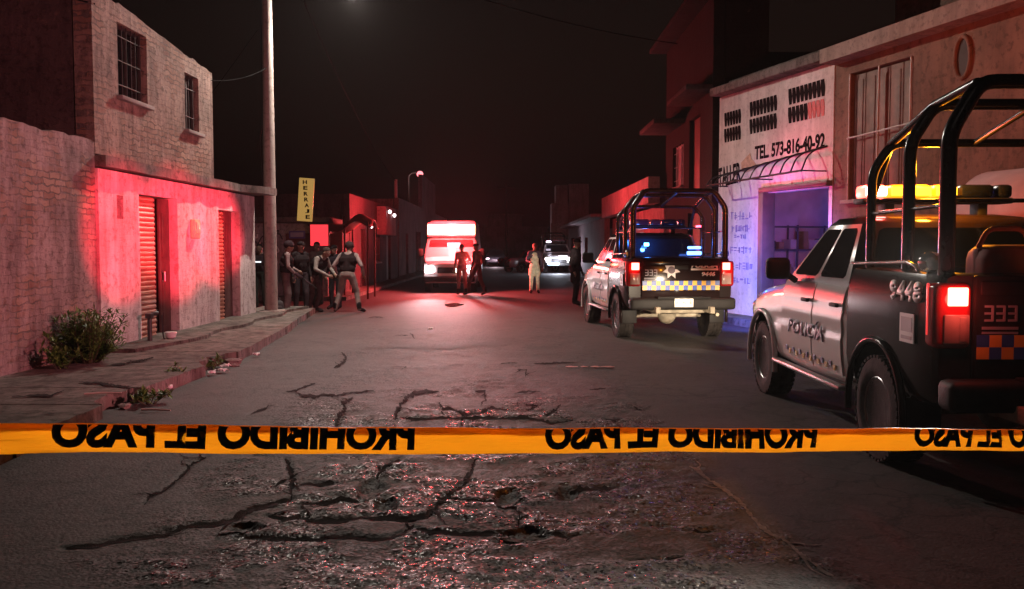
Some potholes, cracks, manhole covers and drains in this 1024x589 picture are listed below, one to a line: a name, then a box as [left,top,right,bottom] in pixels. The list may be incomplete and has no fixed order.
crack [545,531,578,542]
pothole [219,521,255,533]
crack [365,333,582,427]
crack [334,352,347,368]
pothole [496,491,526,508]
crack [66,453,532,551]
